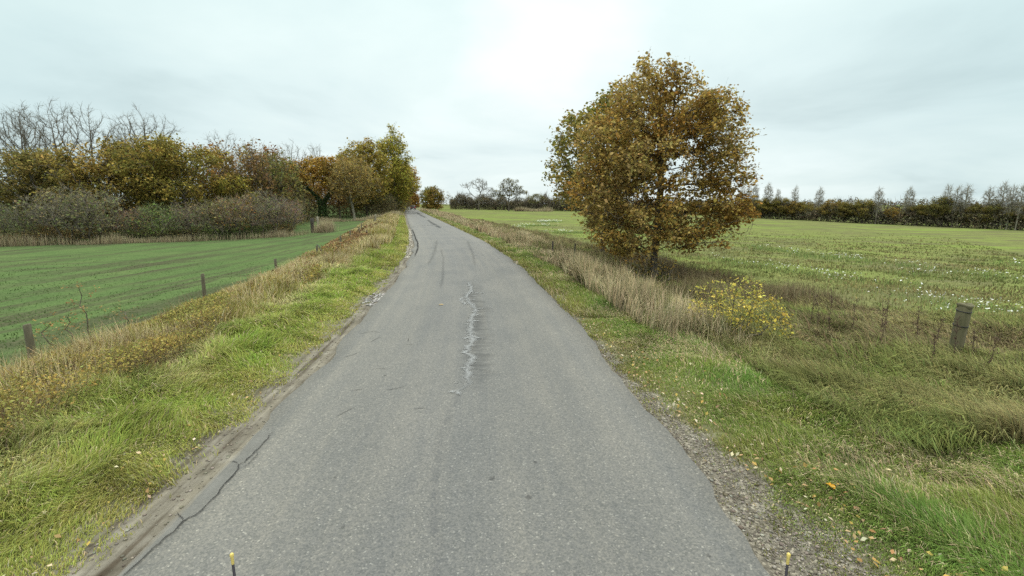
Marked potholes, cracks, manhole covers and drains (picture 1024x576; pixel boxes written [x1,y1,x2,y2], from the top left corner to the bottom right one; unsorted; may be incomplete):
crack [122,436,269,576]
crack [450,280,479,394]
